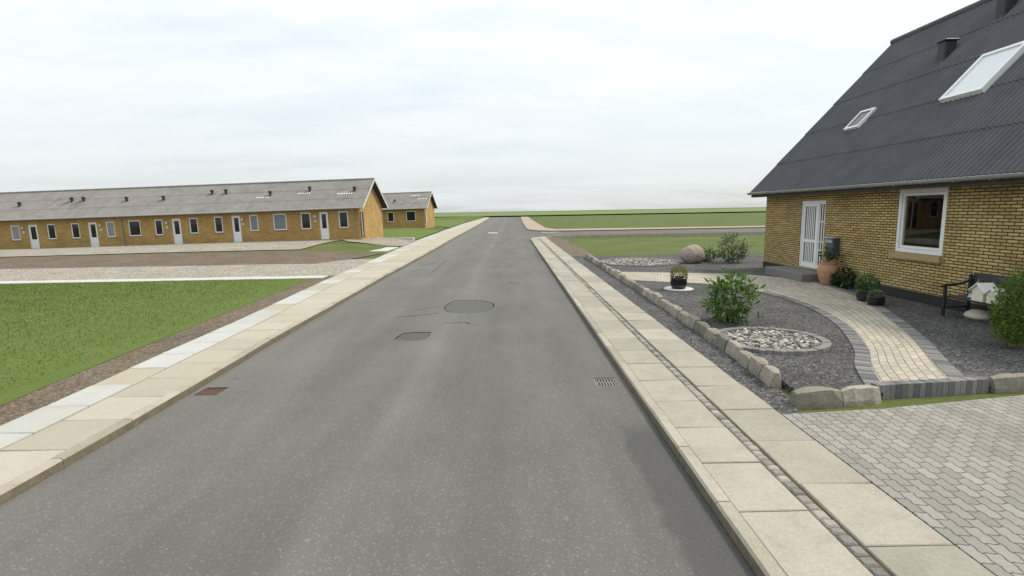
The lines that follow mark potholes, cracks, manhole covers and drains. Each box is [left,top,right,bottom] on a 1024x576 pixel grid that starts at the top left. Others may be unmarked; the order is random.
drain grate [593,378,619,386]
drain grate [194,387,229,396]
